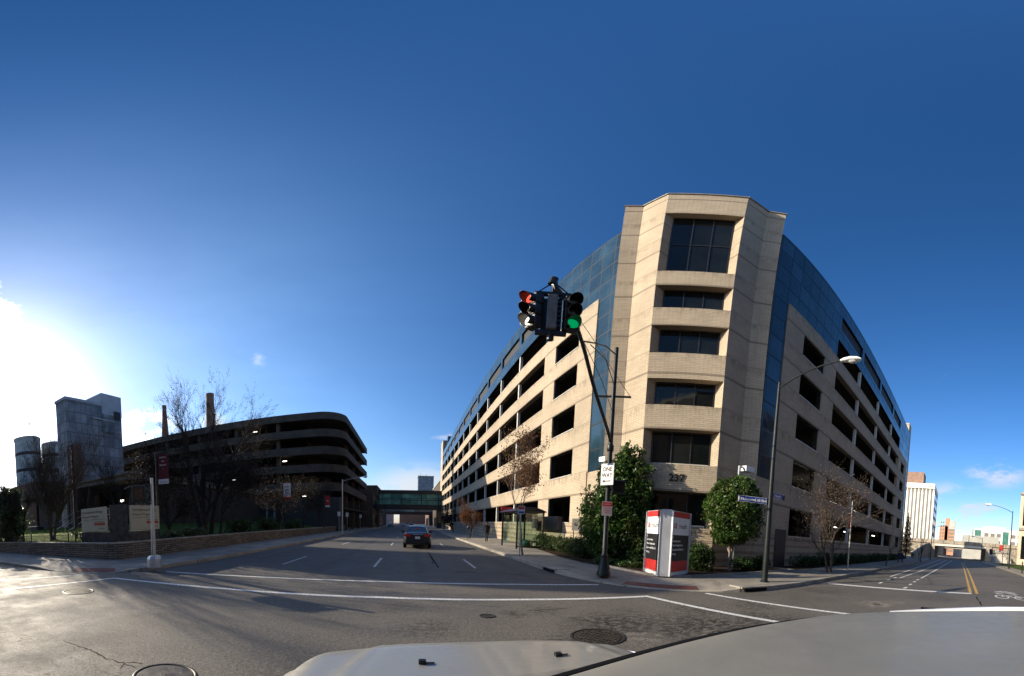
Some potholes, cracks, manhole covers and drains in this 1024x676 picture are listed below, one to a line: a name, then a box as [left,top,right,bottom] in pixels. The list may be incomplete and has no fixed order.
manhole cover [570,628,626,645]
manhole cover [132,663,198,676]
